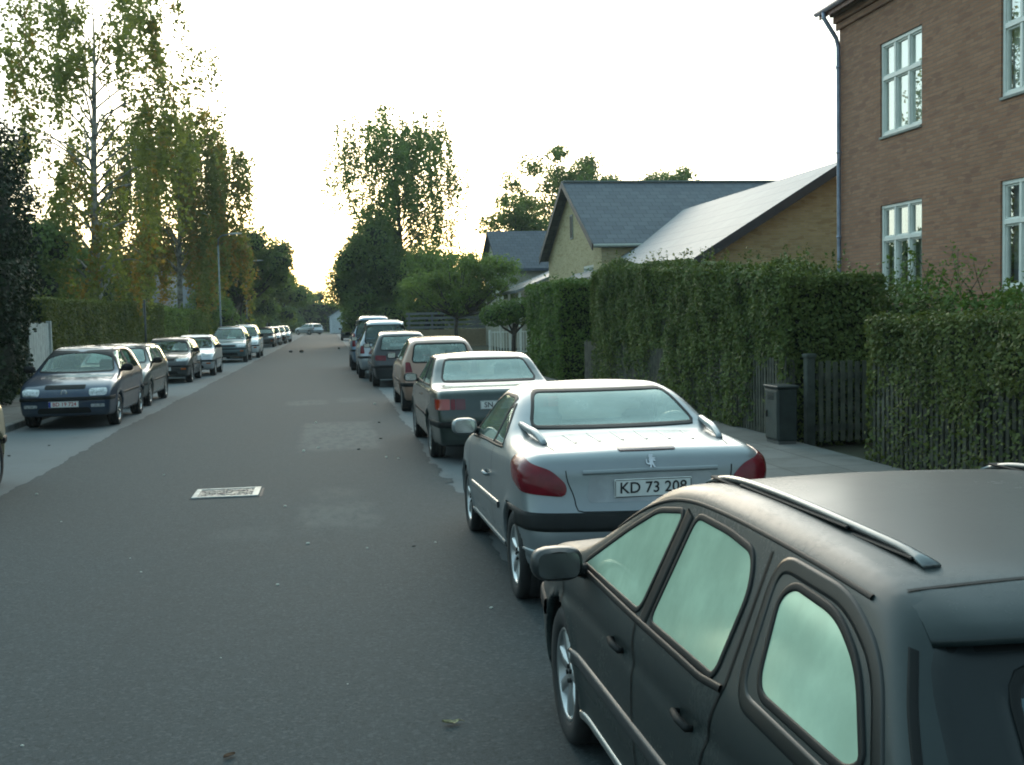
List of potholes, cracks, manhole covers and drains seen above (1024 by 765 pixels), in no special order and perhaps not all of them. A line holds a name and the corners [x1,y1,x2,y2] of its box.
manhole cover [189,486,265,500]
